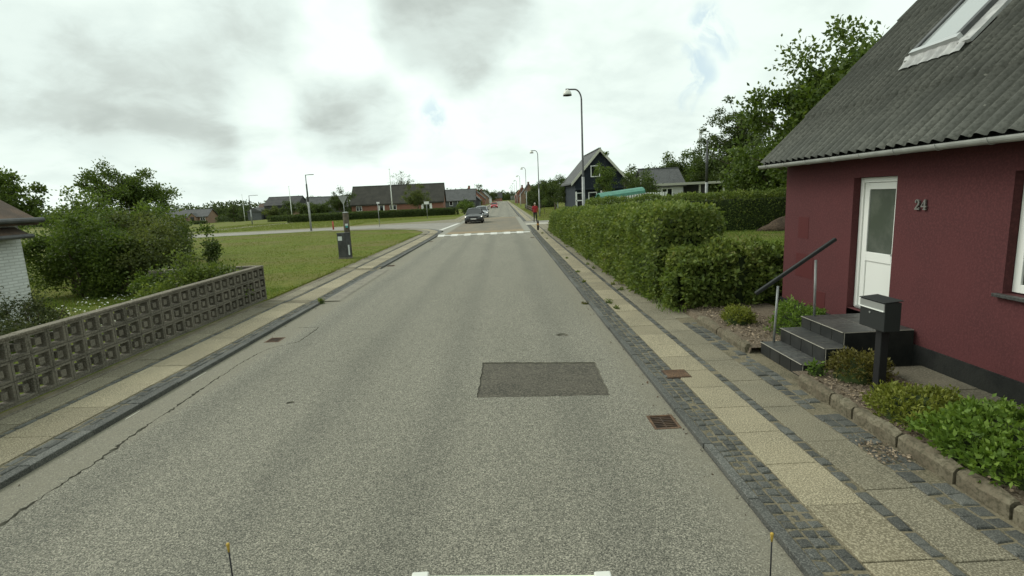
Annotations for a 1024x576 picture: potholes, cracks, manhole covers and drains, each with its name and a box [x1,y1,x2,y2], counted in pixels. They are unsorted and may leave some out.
manhole cover [661,369,692,379]
